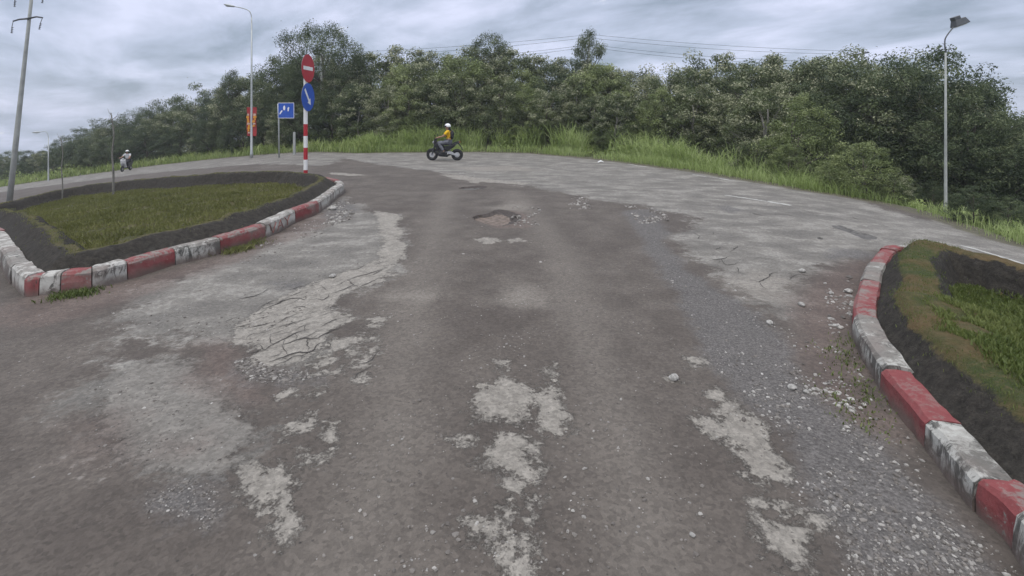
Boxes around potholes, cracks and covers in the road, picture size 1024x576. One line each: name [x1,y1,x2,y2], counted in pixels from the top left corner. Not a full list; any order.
pothole [468,209,528,228]
crack [227,261,386,376]
crack [682,233,798,287]
